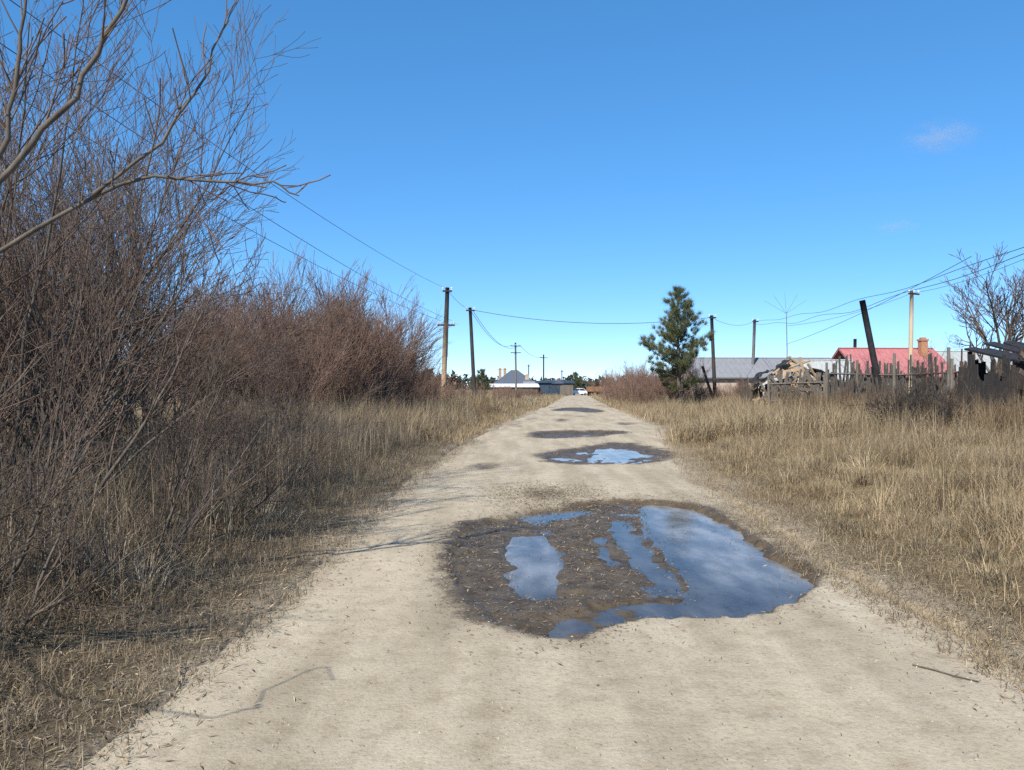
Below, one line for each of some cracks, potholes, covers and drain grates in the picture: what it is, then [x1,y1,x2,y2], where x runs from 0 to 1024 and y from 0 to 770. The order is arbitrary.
pothole [437,498,827,639]
pothole [465,462,498,470]
pothole [531,430,623,438]
pothole [541,442,673,464]
